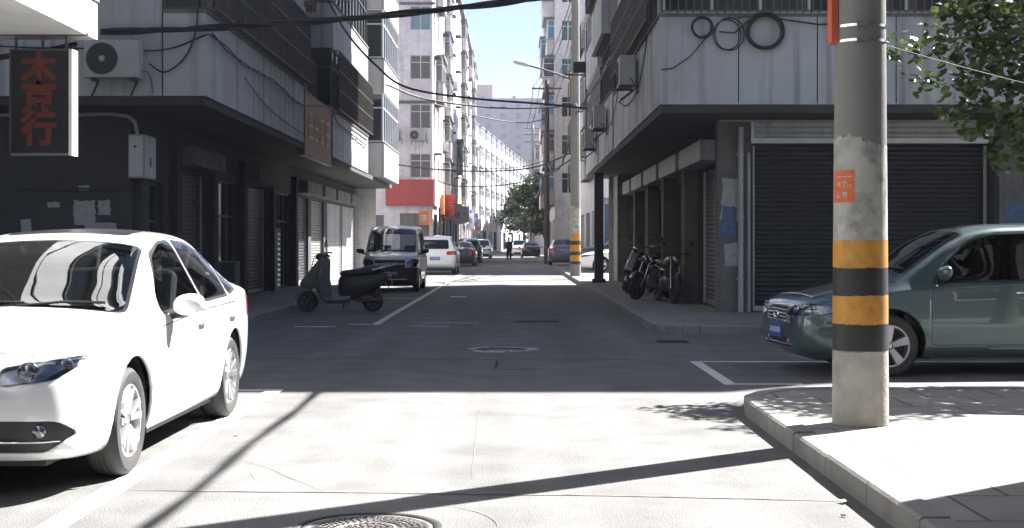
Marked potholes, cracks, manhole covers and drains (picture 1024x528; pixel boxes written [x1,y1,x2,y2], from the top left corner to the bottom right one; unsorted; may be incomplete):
manhole cover [292,512,442,528]
